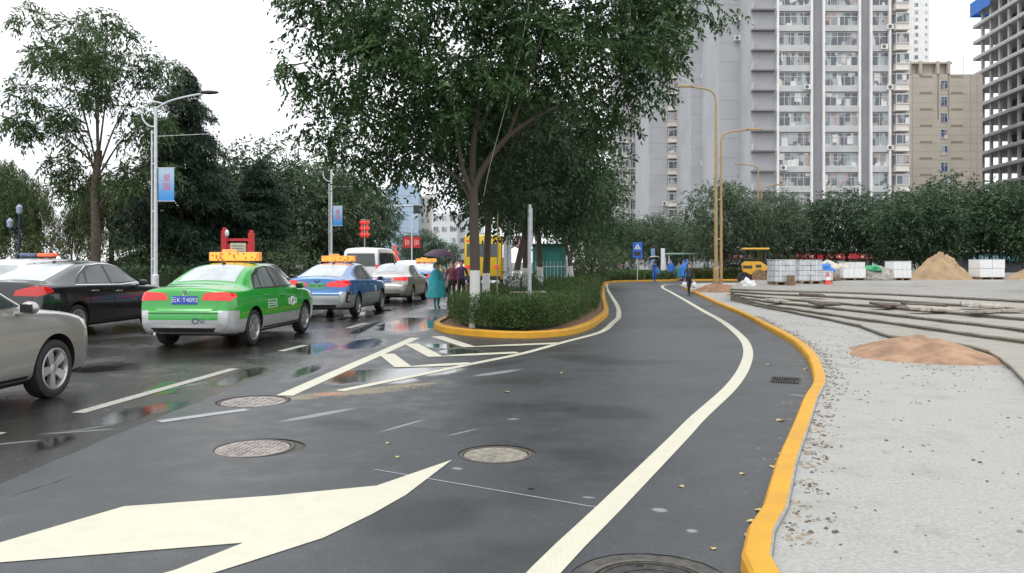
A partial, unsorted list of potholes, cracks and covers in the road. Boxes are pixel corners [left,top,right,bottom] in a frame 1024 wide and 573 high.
manhole cover [571,553,723,573]
manhole cover [458,445,537,464]
manhole cover [211,439,306,458]
manhole cover [215,395,291,408]
